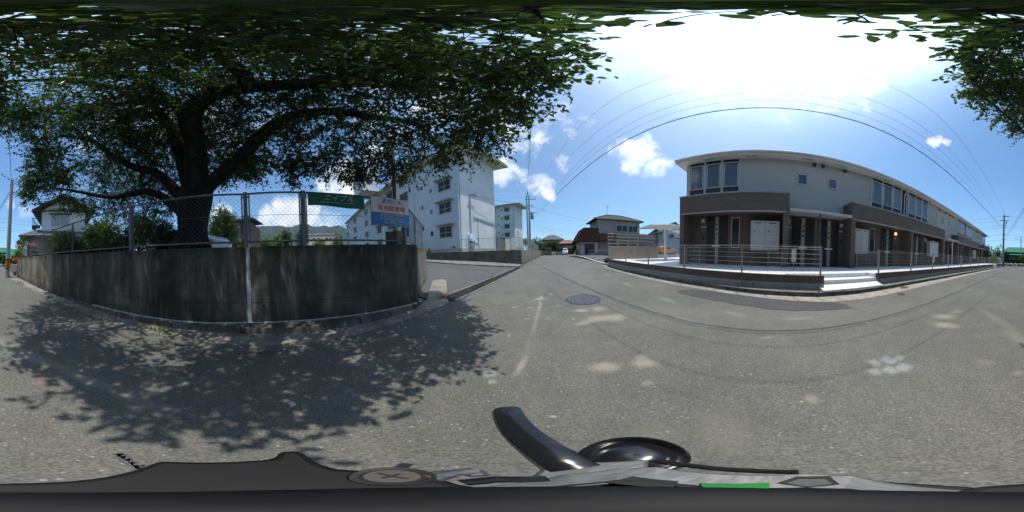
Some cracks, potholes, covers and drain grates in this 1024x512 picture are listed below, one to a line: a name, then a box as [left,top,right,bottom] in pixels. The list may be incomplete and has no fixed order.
drain grate [446,267,523,302]
manhole cover [564,294,603,306]
